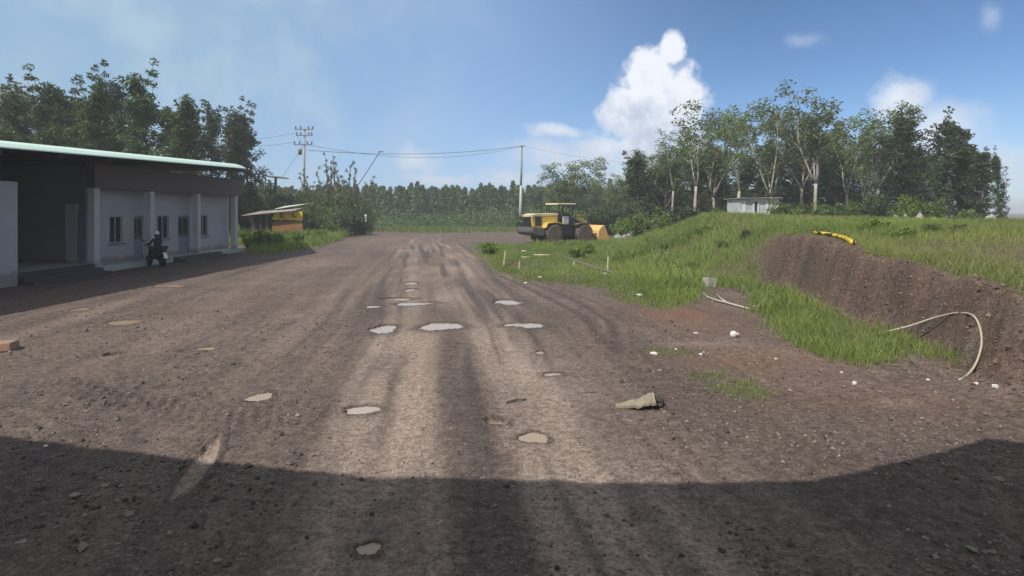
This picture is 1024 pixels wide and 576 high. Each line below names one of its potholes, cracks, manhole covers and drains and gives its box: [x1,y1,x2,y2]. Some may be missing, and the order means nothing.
pothole [97,319,151,327]
pothole [348,537,389,560]
pothole [407,321,476,333]
pothole [486,298,532,306]
pothole [236,391,278,405]
pothole [476,414,516,428]
pothole [361,323,404,336]
pothole [337,403,390,417]
pothole [493,322,554,330]
pothole [511,429,556,446]
